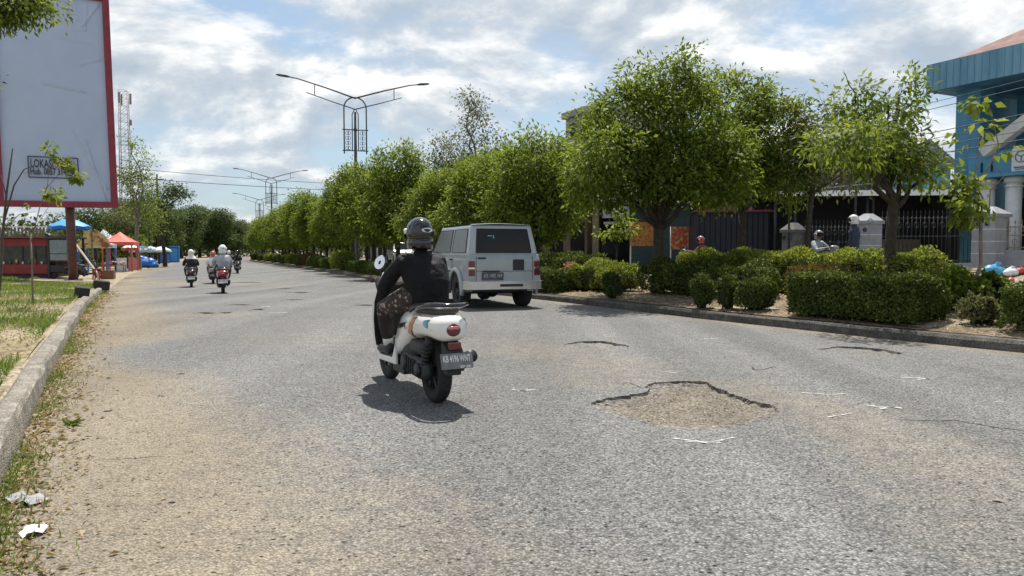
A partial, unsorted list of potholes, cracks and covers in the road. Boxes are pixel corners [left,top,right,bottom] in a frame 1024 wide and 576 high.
pothole [591,381,779,431]
crack [886,418,1023,431]
